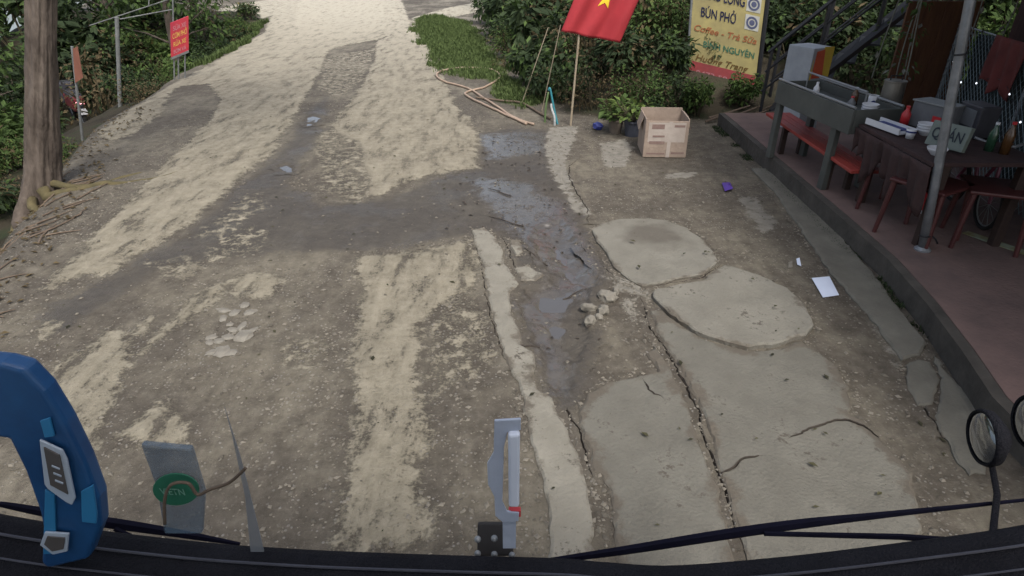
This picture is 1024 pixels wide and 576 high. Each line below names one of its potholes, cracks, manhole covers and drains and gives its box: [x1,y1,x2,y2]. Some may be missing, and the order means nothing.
crack [562,157,596,225]
crack [550,392,605,487]
crack [570,243,759,551]
crack [466,235,524,372]
pothole [509,215,613,408]
crack [791,385,946,438]
